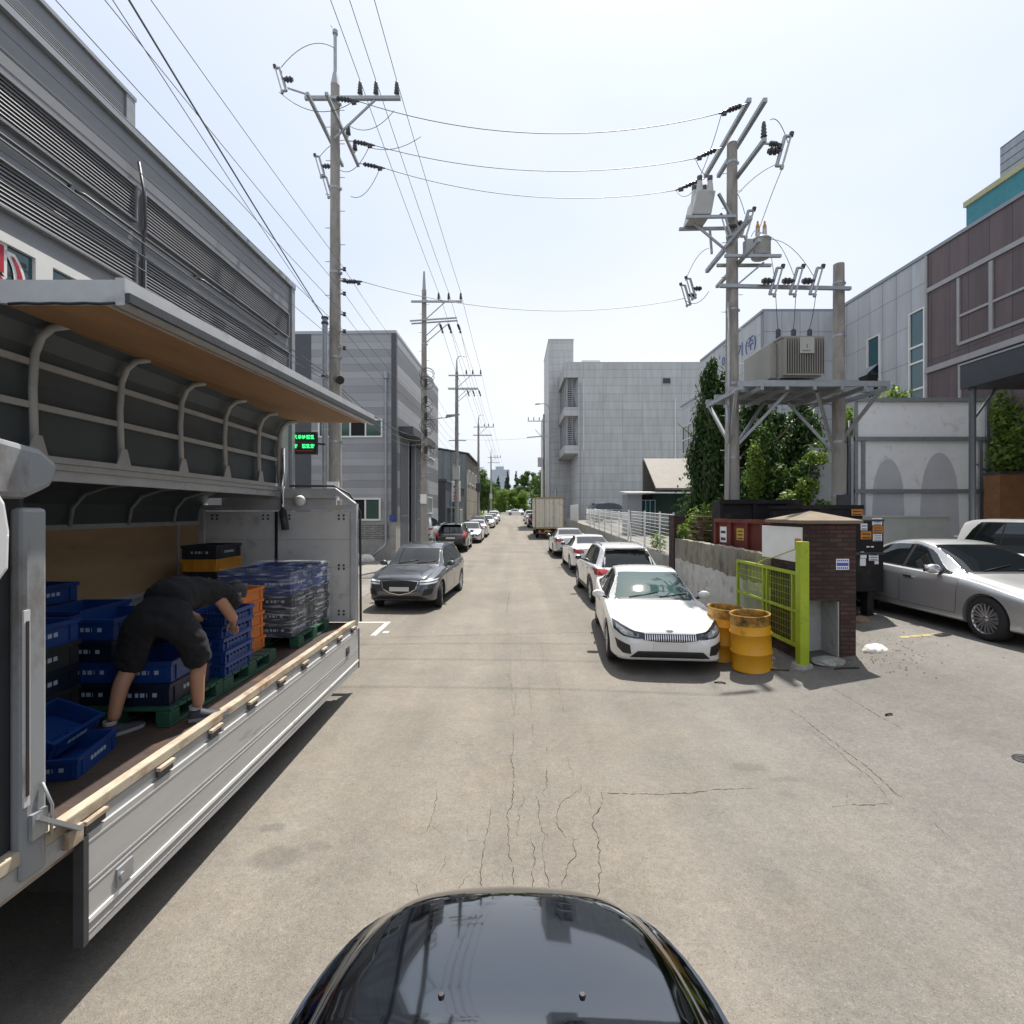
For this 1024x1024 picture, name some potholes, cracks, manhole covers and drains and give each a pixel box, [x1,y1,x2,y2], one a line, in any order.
crack [390,632,754,897]
